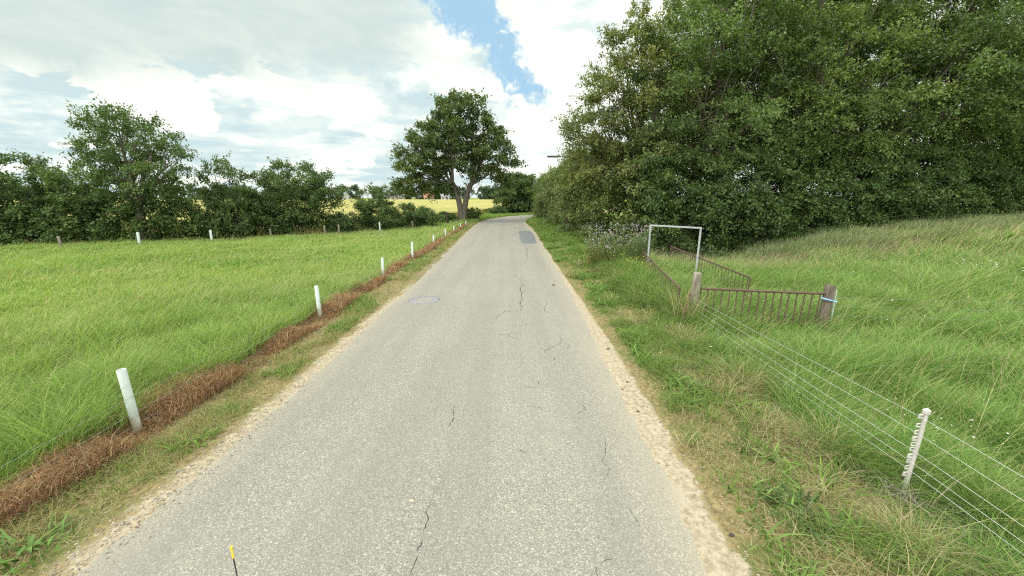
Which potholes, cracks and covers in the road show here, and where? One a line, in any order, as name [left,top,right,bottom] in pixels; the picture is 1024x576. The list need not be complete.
manhole cover [409,296,439,304]
crack [410,492,435,576]
